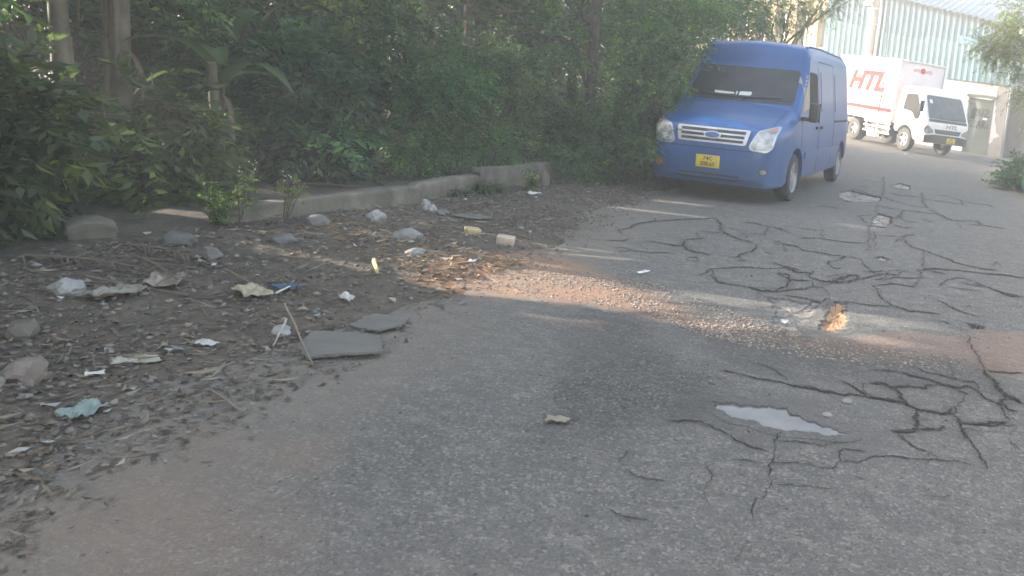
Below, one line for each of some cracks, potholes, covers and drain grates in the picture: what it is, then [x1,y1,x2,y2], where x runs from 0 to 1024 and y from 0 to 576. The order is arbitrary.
pothole [810,299,859,335]
pothole [864,213,897,228]
pothole [833,190,886,203]
pothole [699,397,861,442]
crack [611,176,1024,559]
